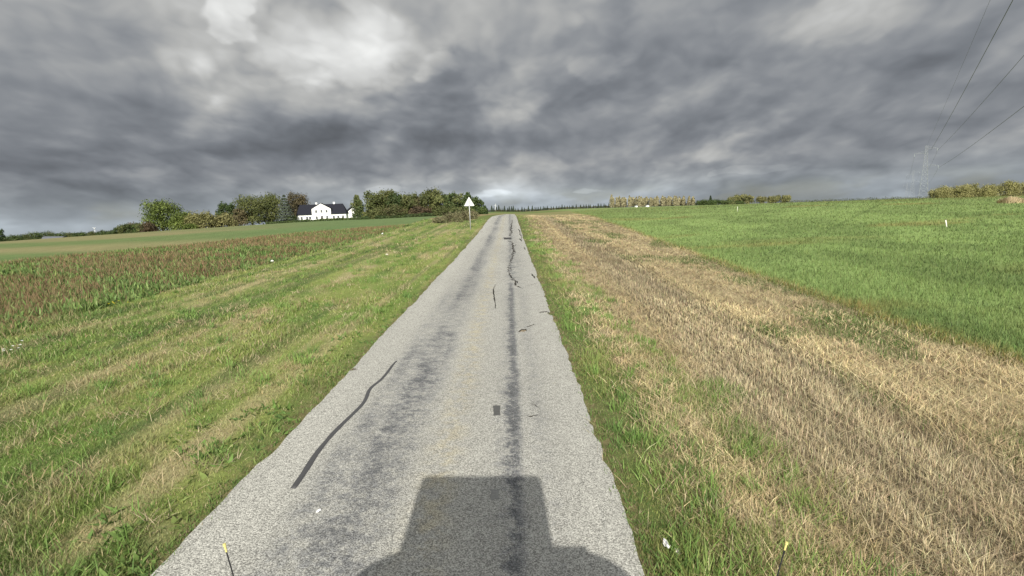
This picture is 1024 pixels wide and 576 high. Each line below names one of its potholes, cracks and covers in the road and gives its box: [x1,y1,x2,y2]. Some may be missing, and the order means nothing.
crack [493,220,537,308]
